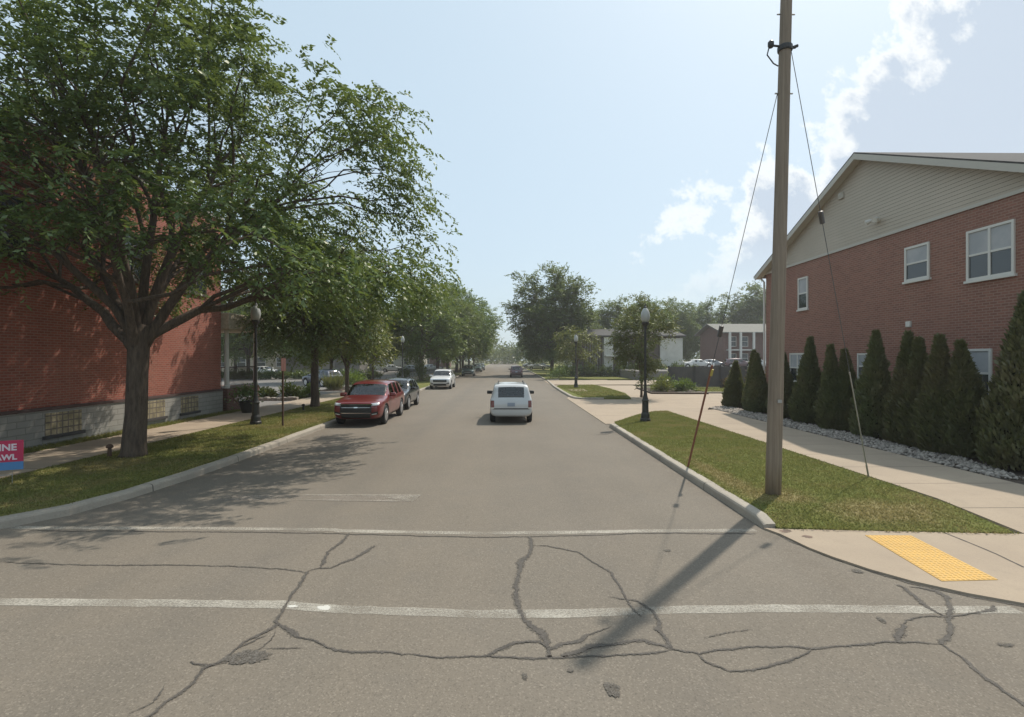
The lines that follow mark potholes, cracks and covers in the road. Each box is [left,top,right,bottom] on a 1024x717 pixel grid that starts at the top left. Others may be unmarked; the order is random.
crack [3,545,1024,717]
pothole [603,682,621,697]
pothole [221,649,274,664]
